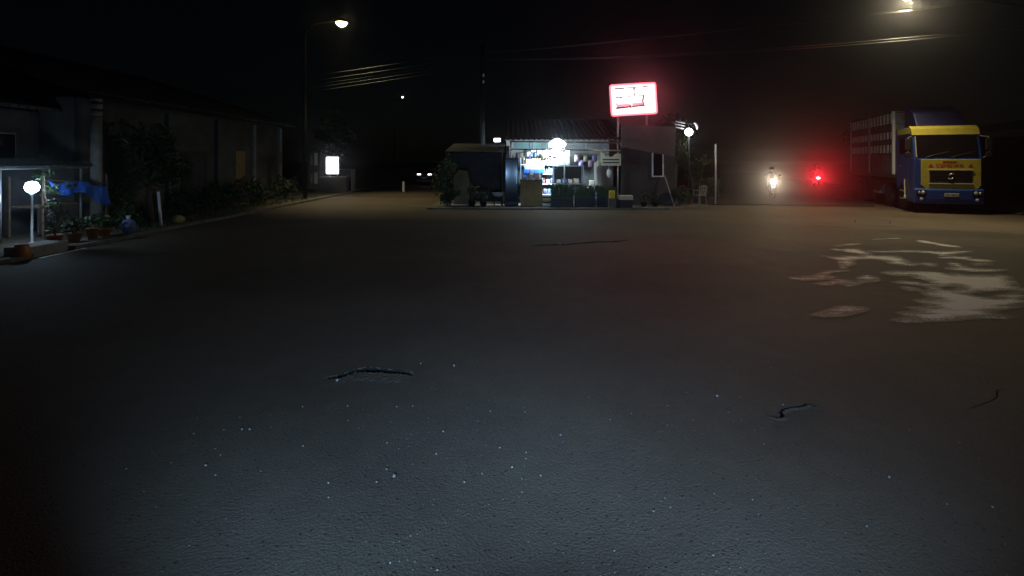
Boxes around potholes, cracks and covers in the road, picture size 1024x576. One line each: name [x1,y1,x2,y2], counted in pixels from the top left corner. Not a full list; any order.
crack [964,388,1007,410]
crack [762,402,823,421]
